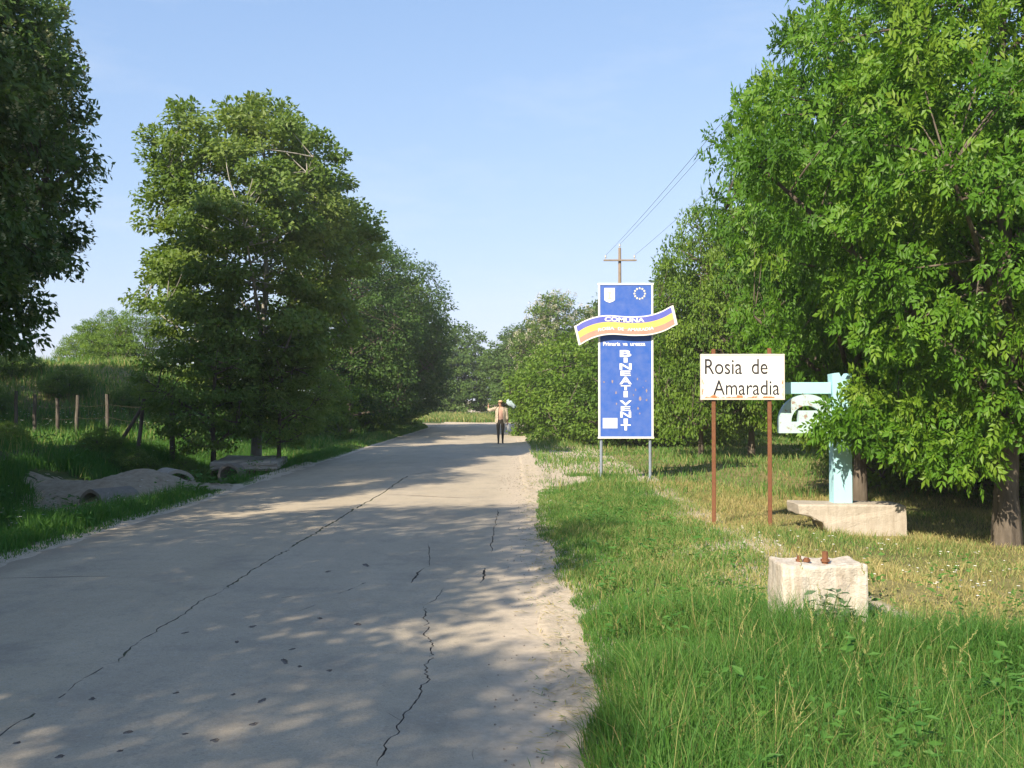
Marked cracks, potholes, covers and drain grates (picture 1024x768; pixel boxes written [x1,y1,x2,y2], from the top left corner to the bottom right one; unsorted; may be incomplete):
crack [472,511,499,760]
crack [377,546,442,762]
